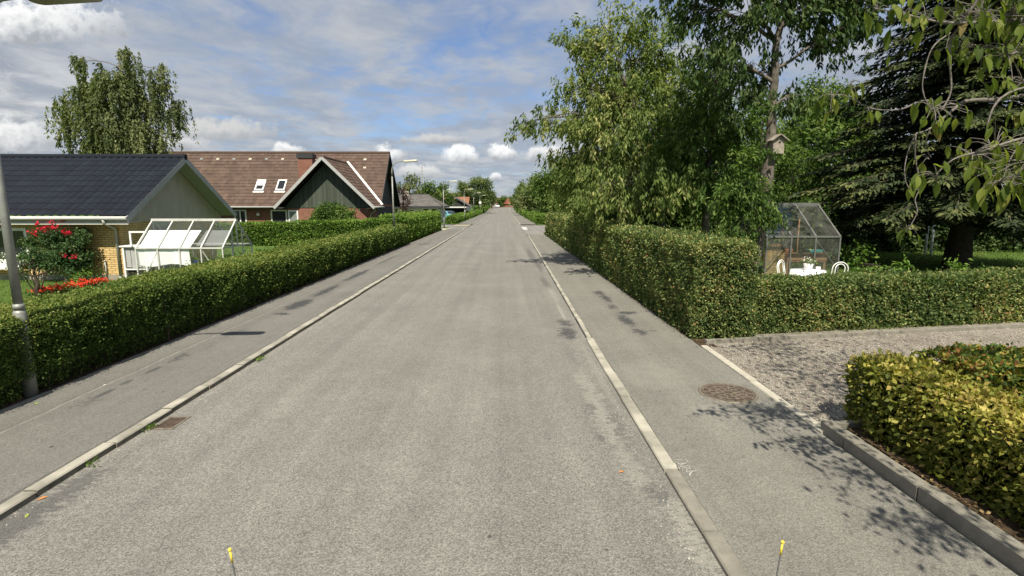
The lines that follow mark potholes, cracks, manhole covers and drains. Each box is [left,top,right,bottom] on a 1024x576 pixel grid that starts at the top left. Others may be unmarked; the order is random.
manhole cover [698,383,759,403]
drain grate [150,416,191,430]
